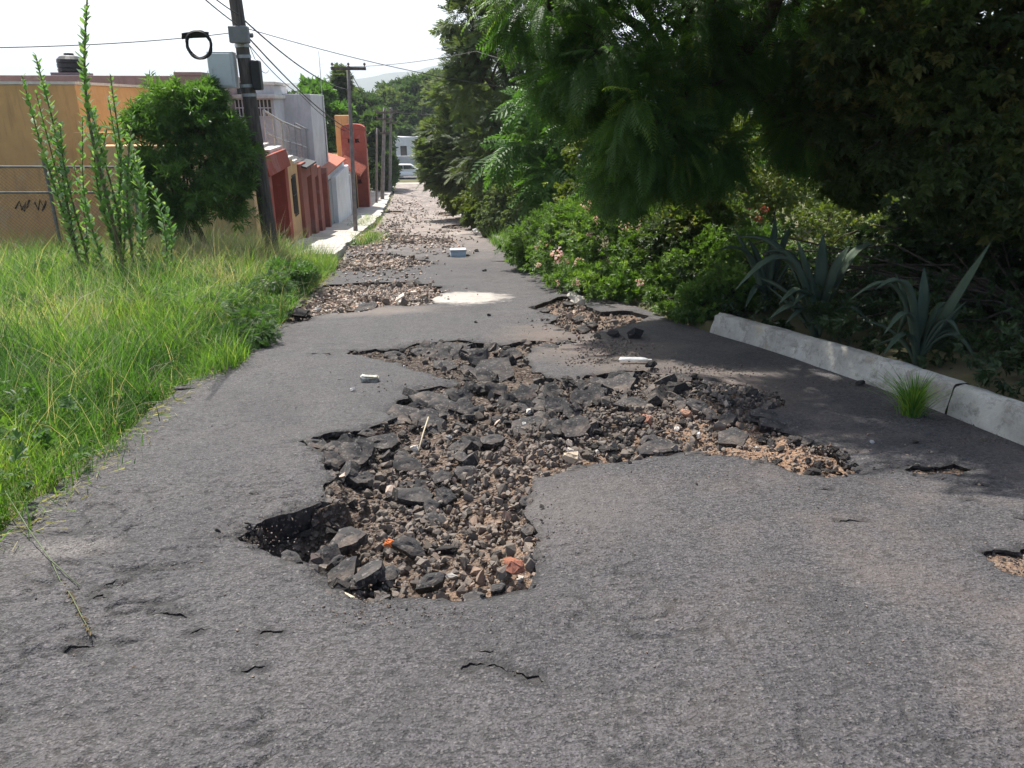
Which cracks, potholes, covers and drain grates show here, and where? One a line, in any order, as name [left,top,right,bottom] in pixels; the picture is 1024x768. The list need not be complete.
pothole [336,254,434,271]
pothole [982,549,1024,577]
crack [152,612,207,634]
pothole [297,282,444,318]
crack [63,645,95,655]
pothole [905,464,970,475]
pothole [237,340,856,602]
crack [461,651,543,683]
pothole [528,296,649,332]
